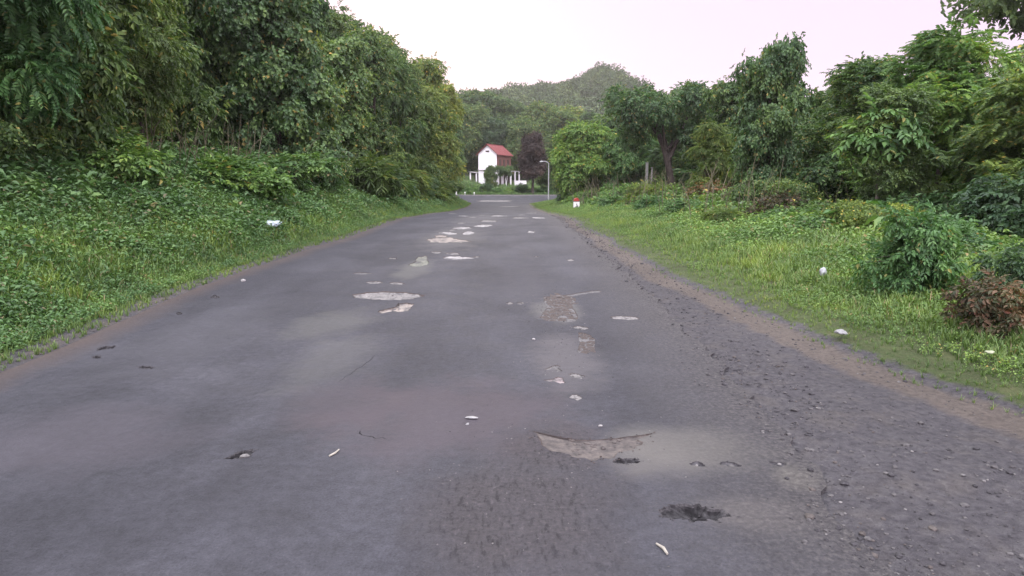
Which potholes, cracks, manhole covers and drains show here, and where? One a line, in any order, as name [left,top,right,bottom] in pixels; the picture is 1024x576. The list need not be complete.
pothole [224,449,259,460]
pothole [613,457,640,465]
pothole [529,430,655,463]
pothole [654,501,740,525]
